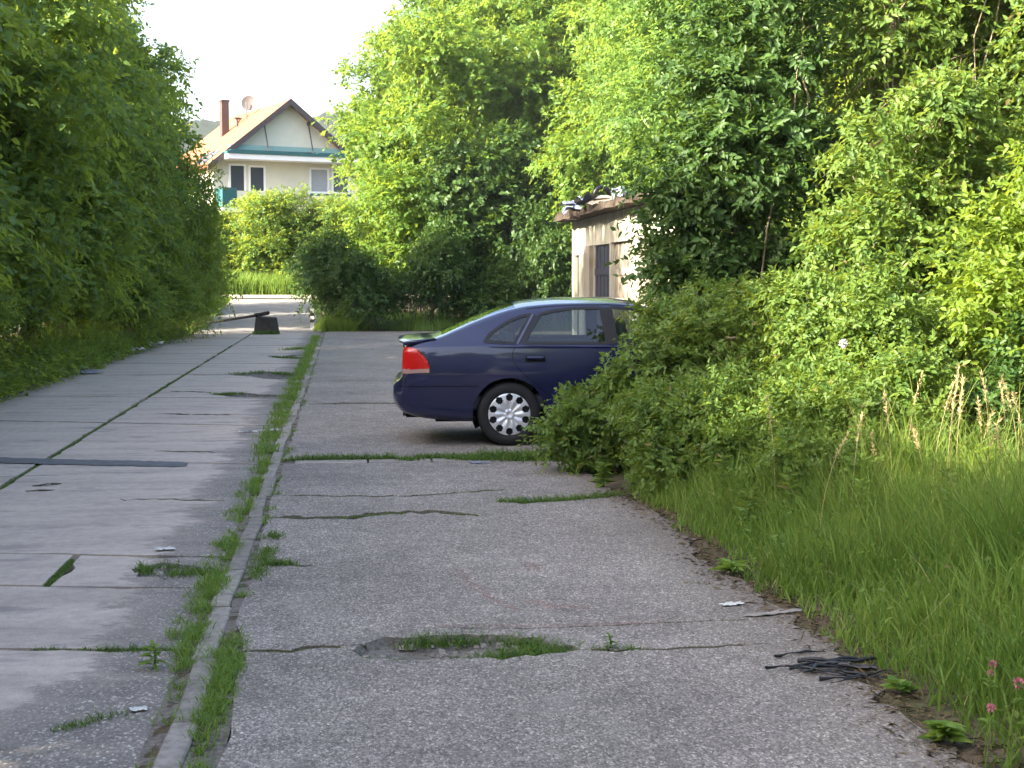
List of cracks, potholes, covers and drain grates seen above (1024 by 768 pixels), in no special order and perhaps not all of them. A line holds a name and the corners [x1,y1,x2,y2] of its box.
crack [434,620,739,629]
crack [570,644,757,652]
pothole [353,634,580,660]
crack [270,490,501,520]
